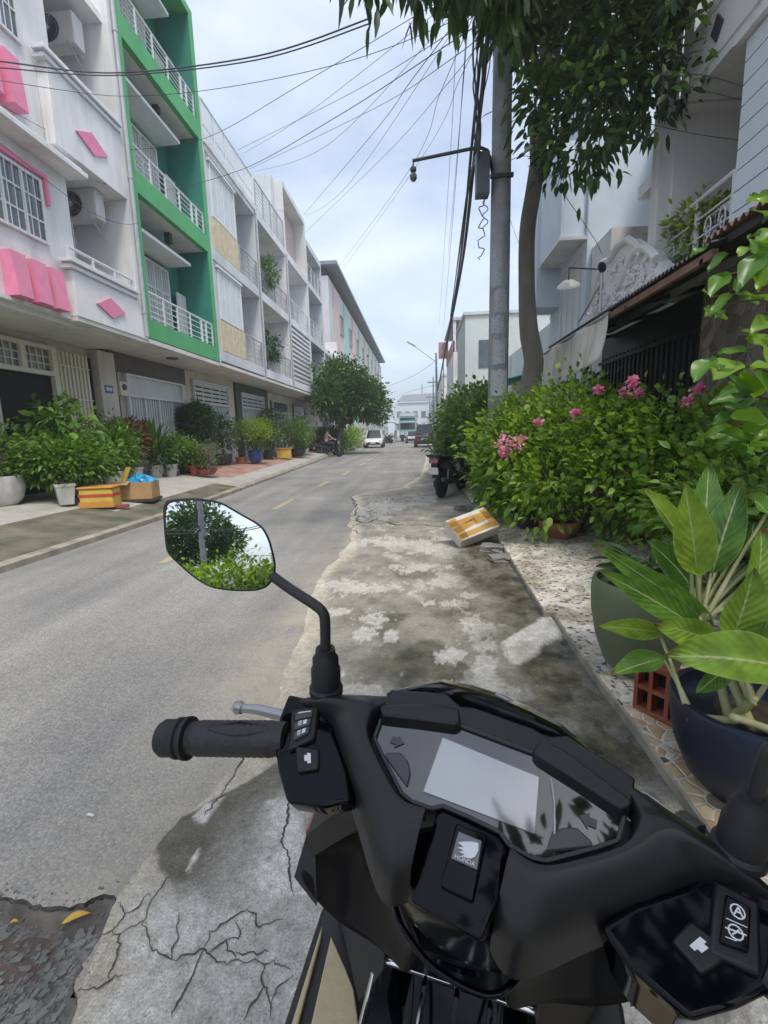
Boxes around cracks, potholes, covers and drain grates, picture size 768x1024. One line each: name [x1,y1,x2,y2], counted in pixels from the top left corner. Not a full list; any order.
crack [204,758,244,816]
crack [82,876,293,1020]
crack [280,802,293,892]
crack [350,497,443,535]
pothole [0,880,129,1024]
